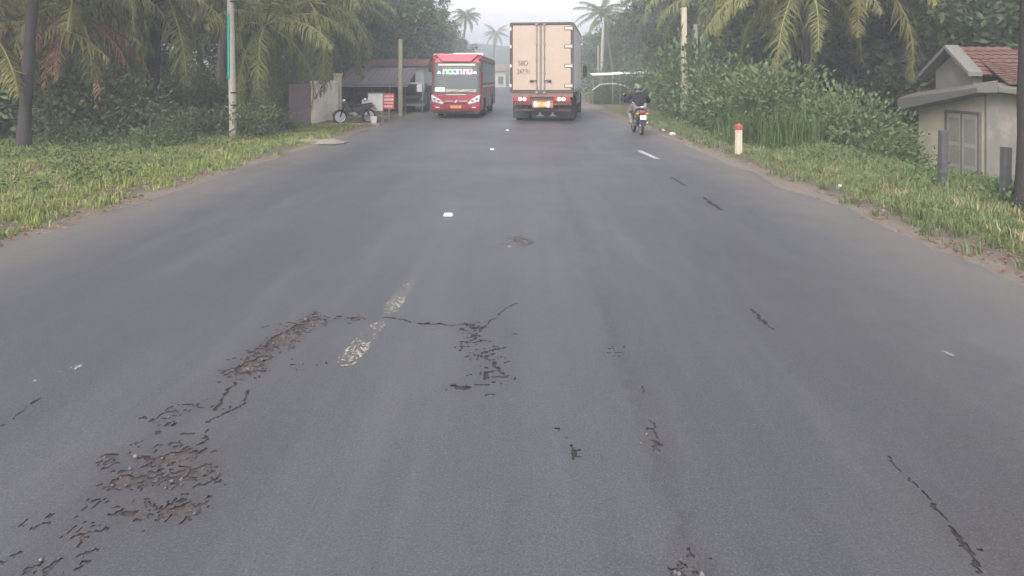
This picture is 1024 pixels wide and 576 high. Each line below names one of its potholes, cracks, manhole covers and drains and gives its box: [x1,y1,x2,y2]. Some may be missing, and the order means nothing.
crack [383,303,518,397]
pothole [502,236,538,248]
crack [671,177,723,210]
crack [750,309,774,330]
crack [197,382,250,446]
crack [555,427,582,460]
crack [887,456,983,574]
